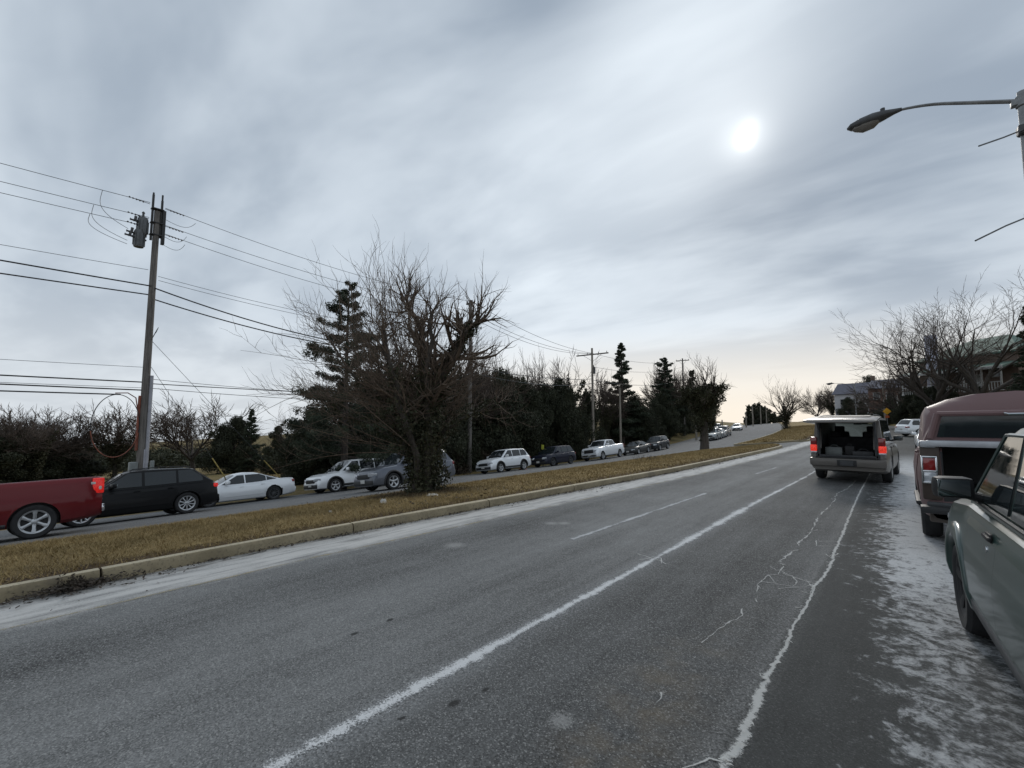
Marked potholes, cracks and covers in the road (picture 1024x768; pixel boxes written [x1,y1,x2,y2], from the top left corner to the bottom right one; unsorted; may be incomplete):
crack [682,473,871,768]
